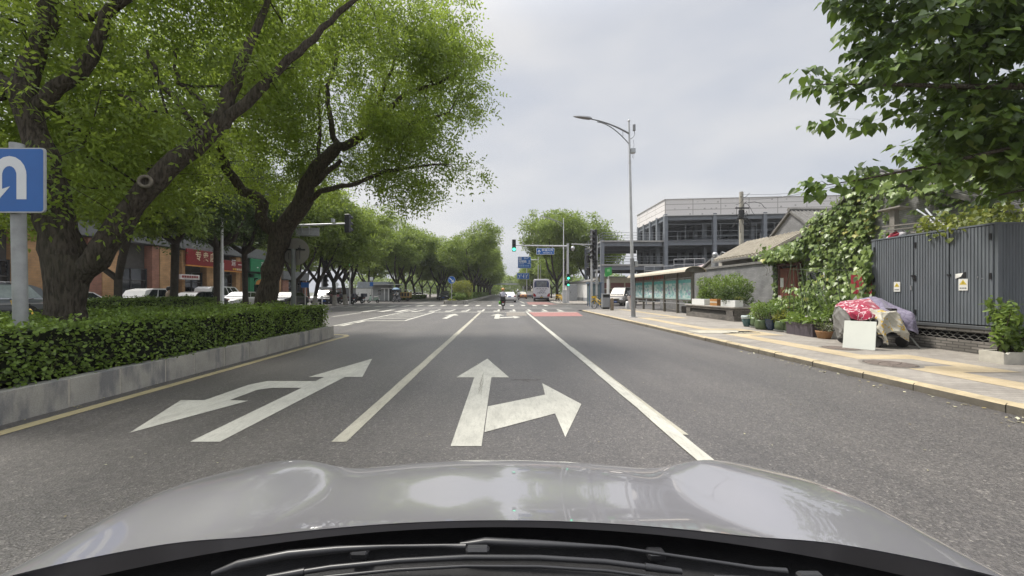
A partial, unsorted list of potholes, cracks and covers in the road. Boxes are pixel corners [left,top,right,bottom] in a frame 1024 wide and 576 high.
manhole cover [858,359,925,368]
